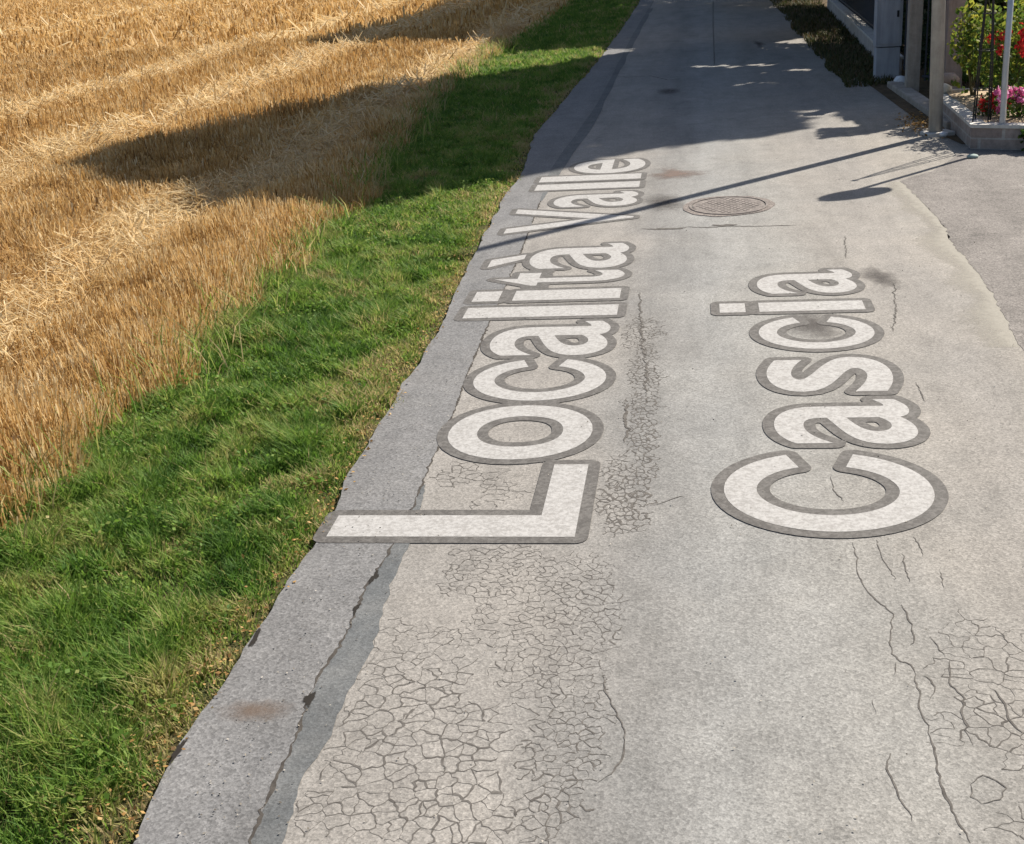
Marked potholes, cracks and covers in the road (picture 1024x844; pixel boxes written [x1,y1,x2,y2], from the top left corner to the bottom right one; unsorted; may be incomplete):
crack [852,537,1024,843]
crack [594,293,684,537]
manhole cover [683,196,775,217]
